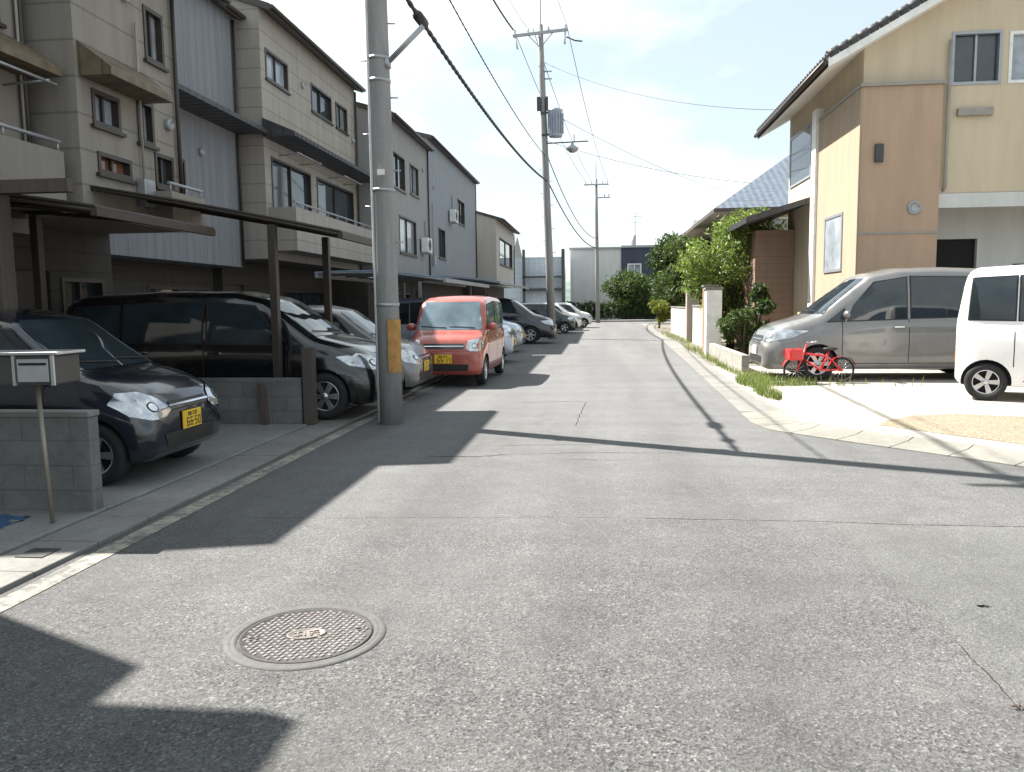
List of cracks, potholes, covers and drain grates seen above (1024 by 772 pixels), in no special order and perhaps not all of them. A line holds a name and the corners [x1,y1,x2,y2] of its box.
crack [922,602,1019,709]
manhole cover [223,604,387,671]
